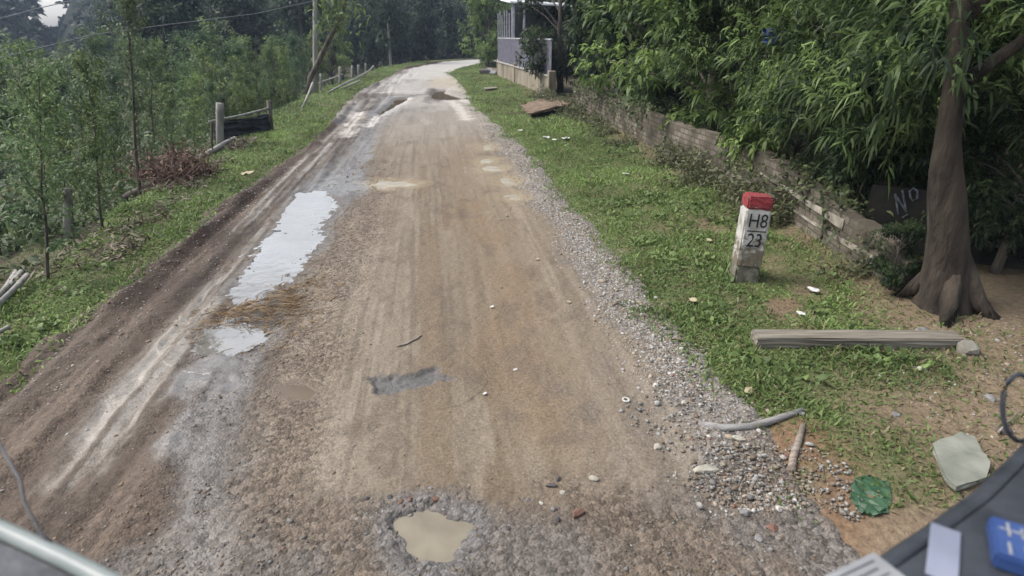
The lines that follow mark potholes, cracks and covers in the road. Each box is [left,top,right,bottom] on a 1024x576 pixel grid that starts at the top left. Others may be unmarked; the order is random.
pothole [423,87,471,101]
pothole [330,468,532,576]
